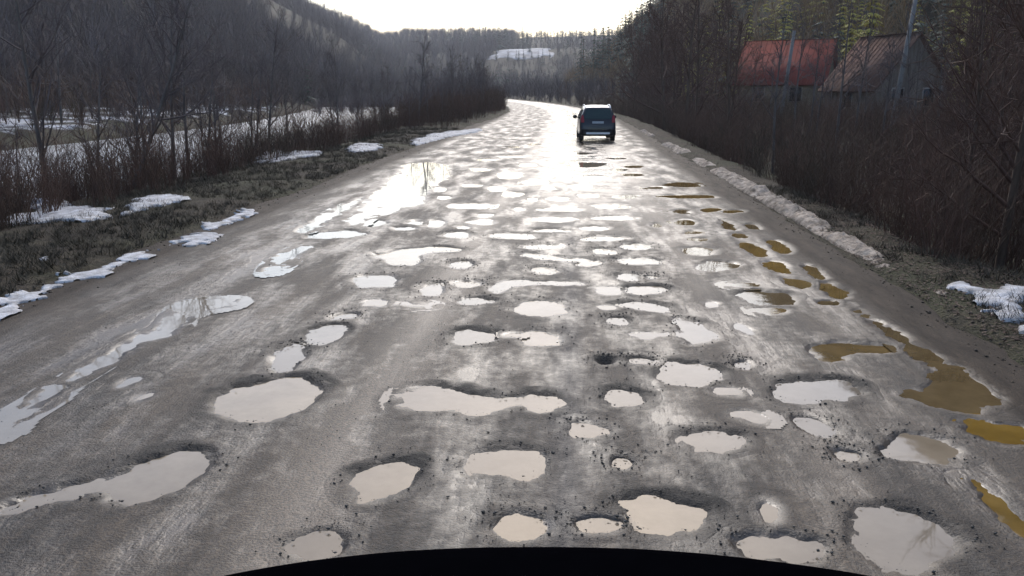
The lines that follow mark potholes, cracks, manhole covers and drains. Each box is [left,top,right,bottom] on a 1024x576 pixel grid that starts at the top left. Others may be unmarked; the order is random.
pothole [441,436,567,489]
pothole [370,379,588,422]
pothole [749,370,884,410]
pothole [592,481,736,548]
pothole [638,354,746,393]
pothole [323,449,442,513]
pothole [253,339,324,378]
pothole [657,423,766,460]
pothole [707,523,850,570]
pothole [187,367,345,431]
pothole [787,335,904,367]
